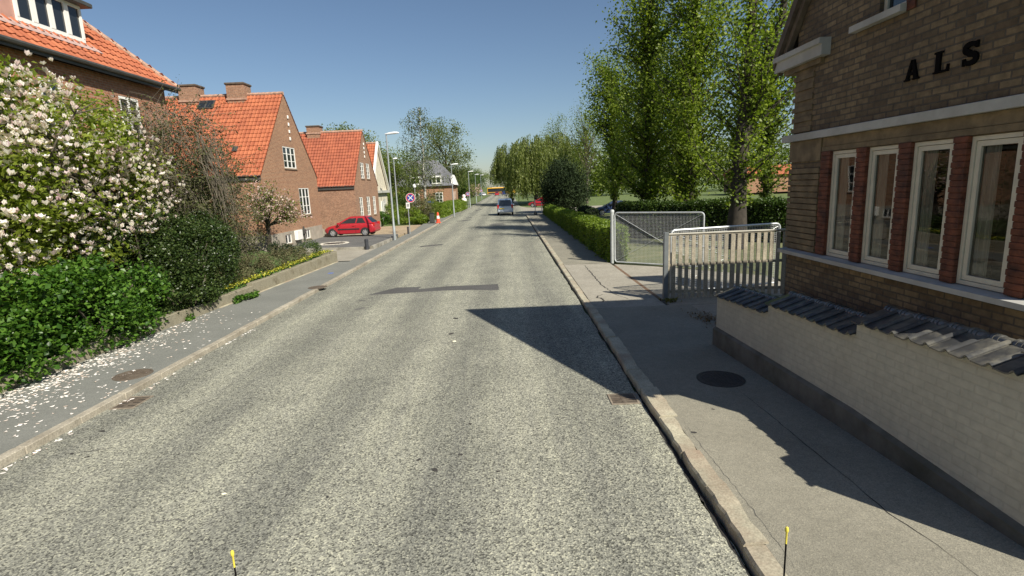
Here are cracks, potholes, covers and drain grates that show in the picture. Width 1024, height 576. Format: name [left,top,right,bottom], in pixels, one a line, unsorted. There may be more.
manhole cover [696,371,746,388]
drain grate [607,393,640,405]
drain grate [109,395,154,410]
manhole cover [112,369,154,381]
